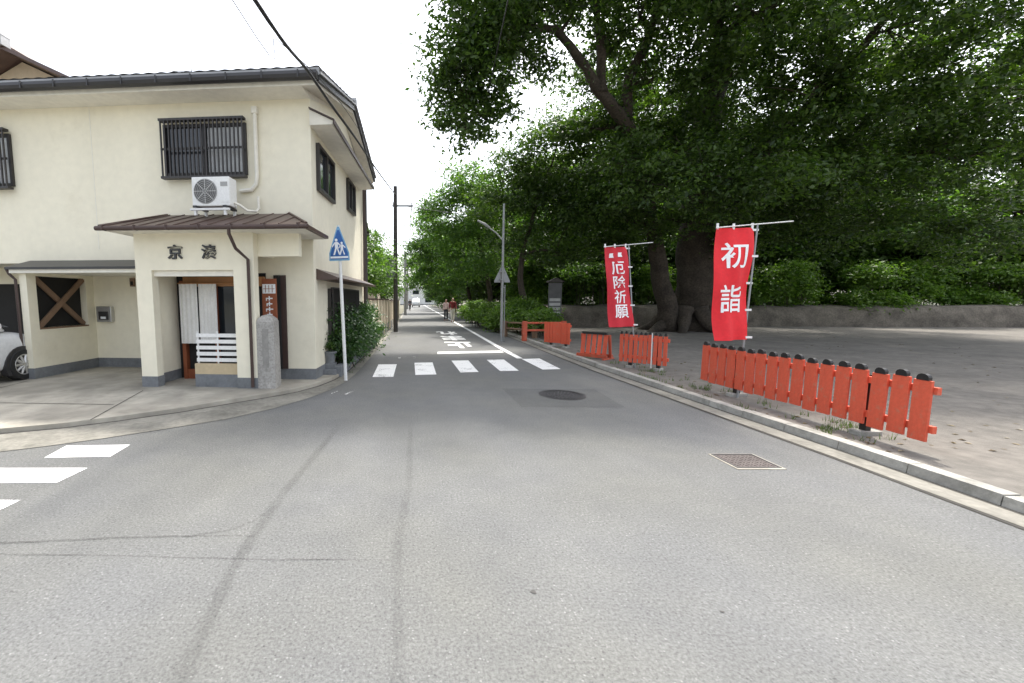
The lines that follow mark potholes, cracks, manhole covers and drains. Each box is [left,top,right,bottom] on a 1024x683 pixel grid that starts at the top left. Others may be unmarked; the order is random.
manhole cover [539,390,586,400]
